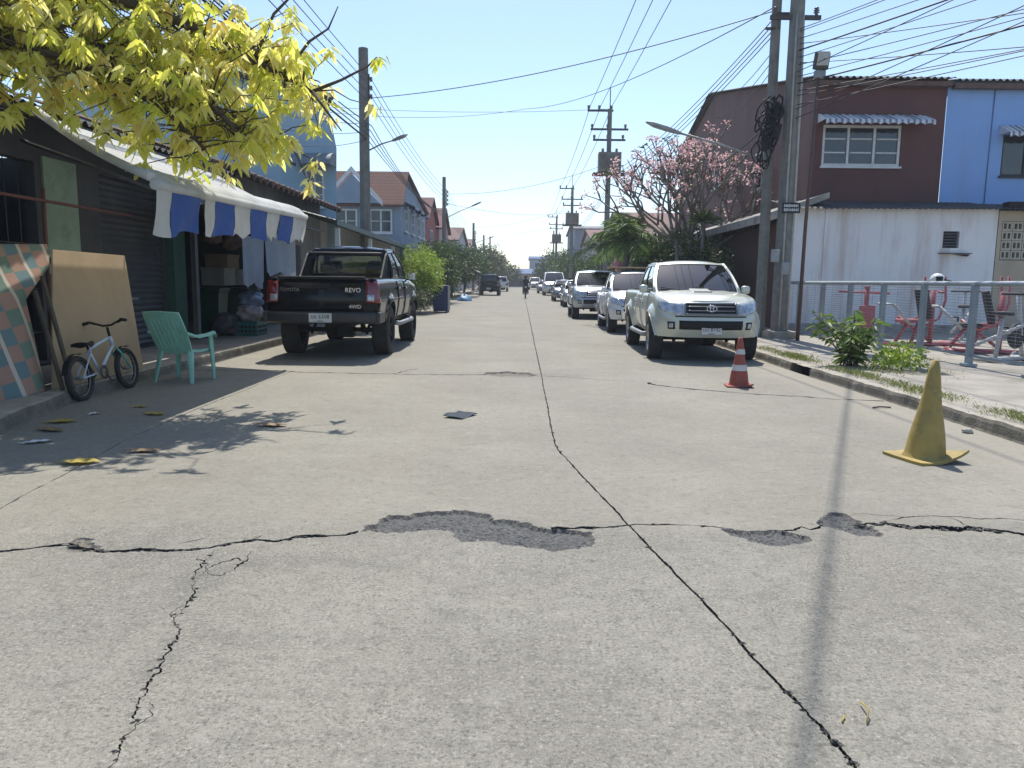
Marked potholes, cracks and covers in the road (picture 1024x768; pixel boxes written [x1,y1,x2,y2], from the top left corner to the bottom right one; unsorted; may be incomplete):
crack [0,531,358,768]
pothole [61,537,104,553]
pothole [361,510,595,552]
crack [550,523,825,533]
crack [852,513,1024,536]
pothole [816,512,883,537]
pothole [721,528,813,546]
